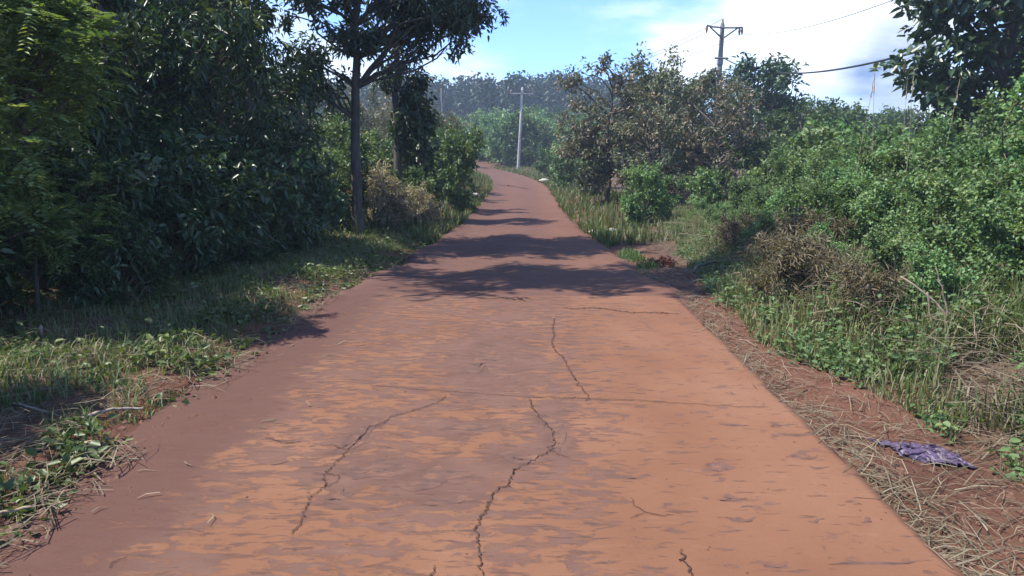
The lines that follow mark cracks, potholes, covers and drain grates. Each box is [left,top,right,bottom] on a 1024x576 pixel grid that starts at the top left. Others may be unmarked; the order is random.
crack [679,549,693,576]
crack [551,307,678,401]
crack [292,398,443,533]
crack [460,397,565,576]
